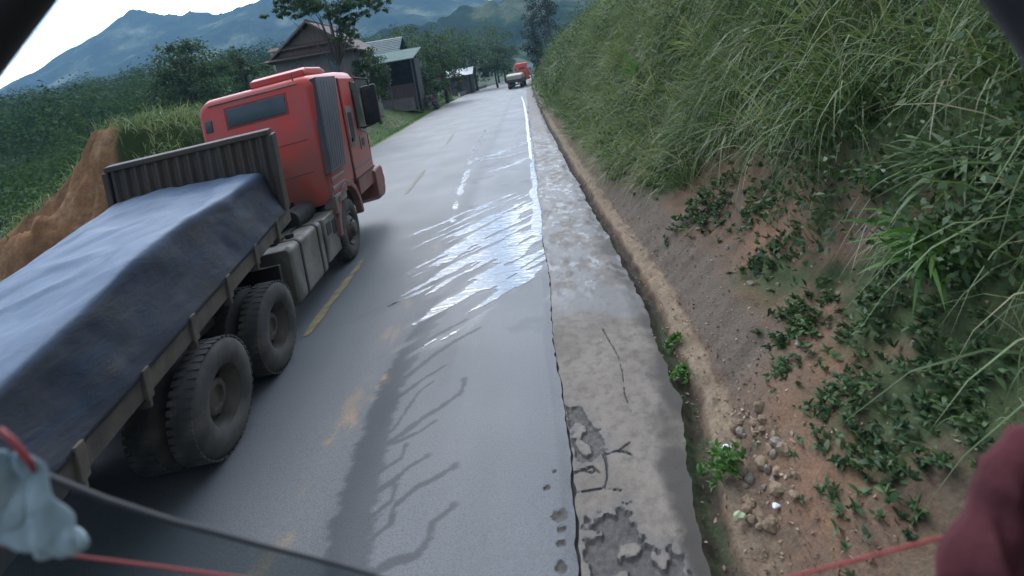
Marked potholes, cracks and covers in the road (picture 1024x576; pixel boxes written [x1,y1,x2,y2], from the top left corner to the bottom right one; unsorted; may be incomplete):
crack [527,98,633,576]
pothole [580,500,694,576]
pothole [550,508,568,523]
pothole [564,403,608,463]
pothole [554,559,568,574]
